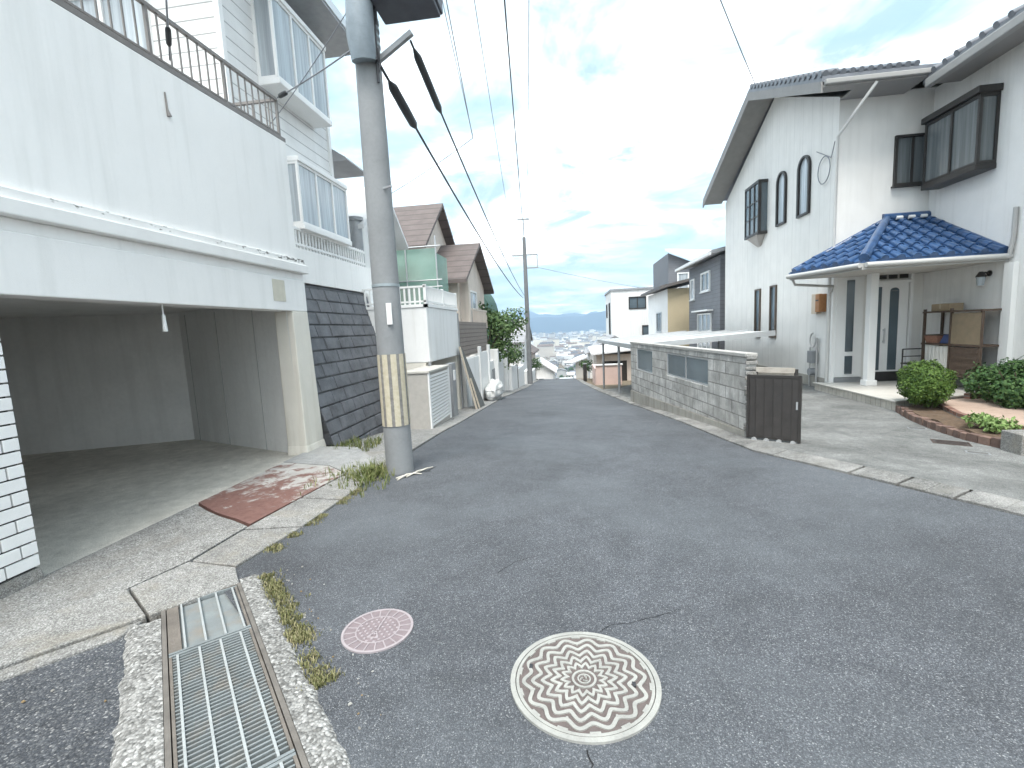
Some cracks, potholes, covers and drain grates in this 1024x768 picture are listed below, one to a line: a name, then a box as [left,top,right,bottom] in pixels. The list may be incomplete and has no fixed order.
drain grate [169,627,295,768]
drain grate [266,752,301,768]
manhole cover [510,632,662,745]
manhole cover [341,609,413,654]
drain grate [167,586,251,656]
